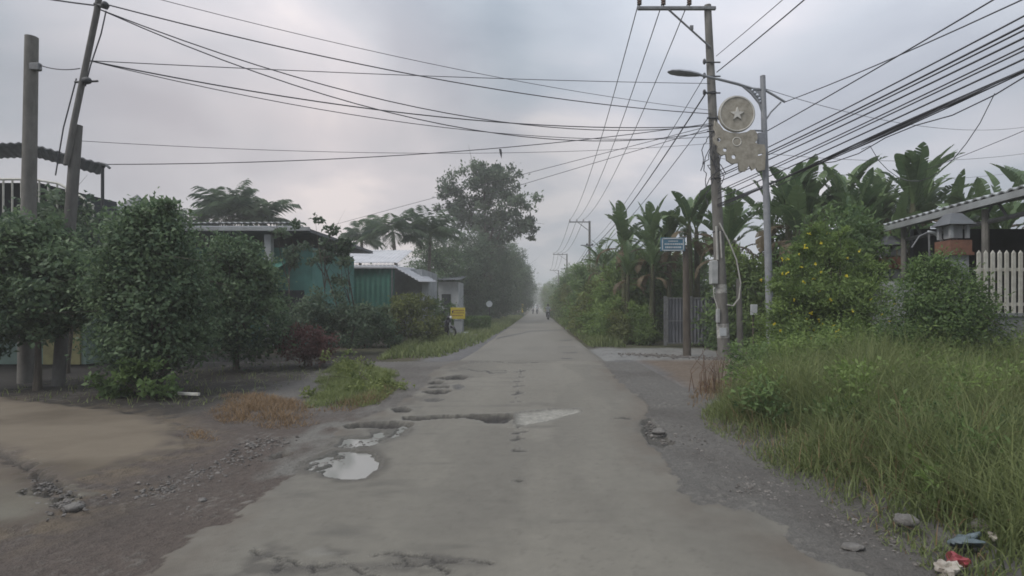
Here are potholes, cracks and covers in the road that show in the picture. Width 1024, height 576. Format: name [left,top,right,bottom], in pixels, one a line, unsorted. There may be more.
pothole [303,448,385,481]
pothole [328,426,412,450]
pothole [400,413,513,424]
pothole [638,417,678,448]
